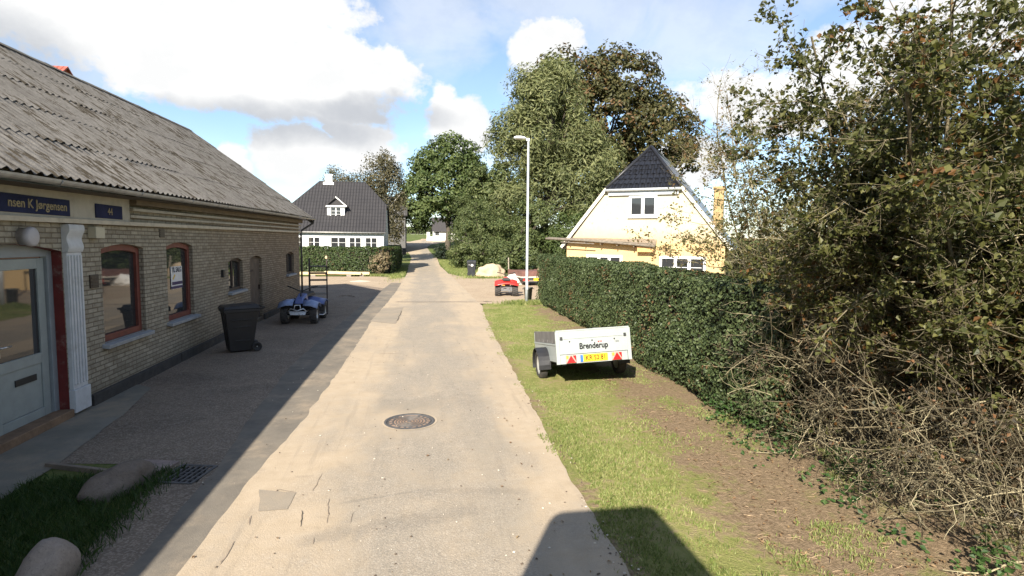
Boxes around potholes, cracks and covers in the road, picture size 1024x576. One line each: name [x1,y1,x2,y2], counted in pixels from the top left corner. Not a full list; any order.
manhole cover [382,413,437,430]
drain grate [153,464,218,484]
